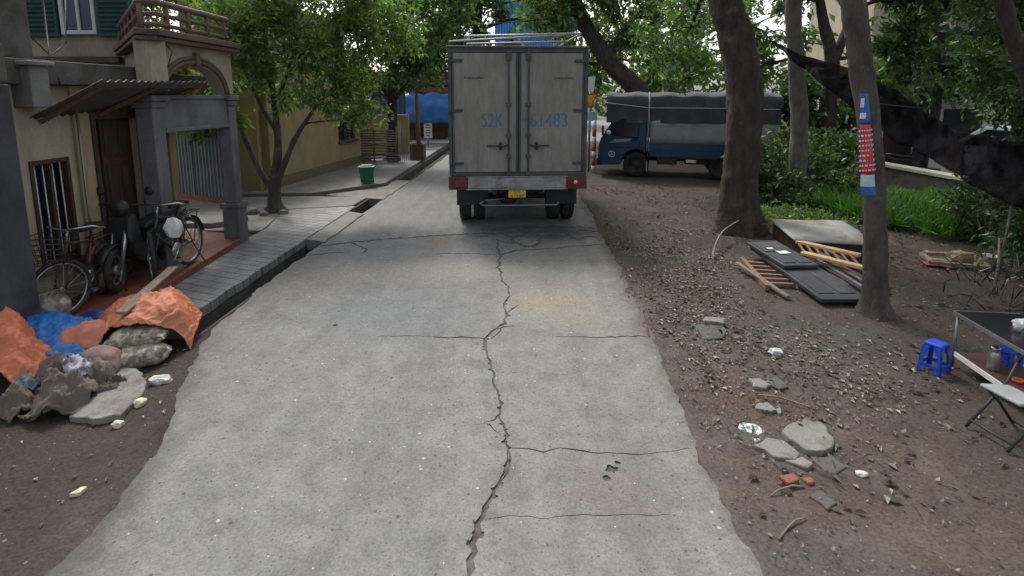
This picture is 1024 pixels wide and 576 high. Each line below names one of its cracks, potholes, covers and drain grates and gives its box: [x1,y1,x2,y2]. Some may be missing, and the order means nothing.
crack [308,226,693,576]
